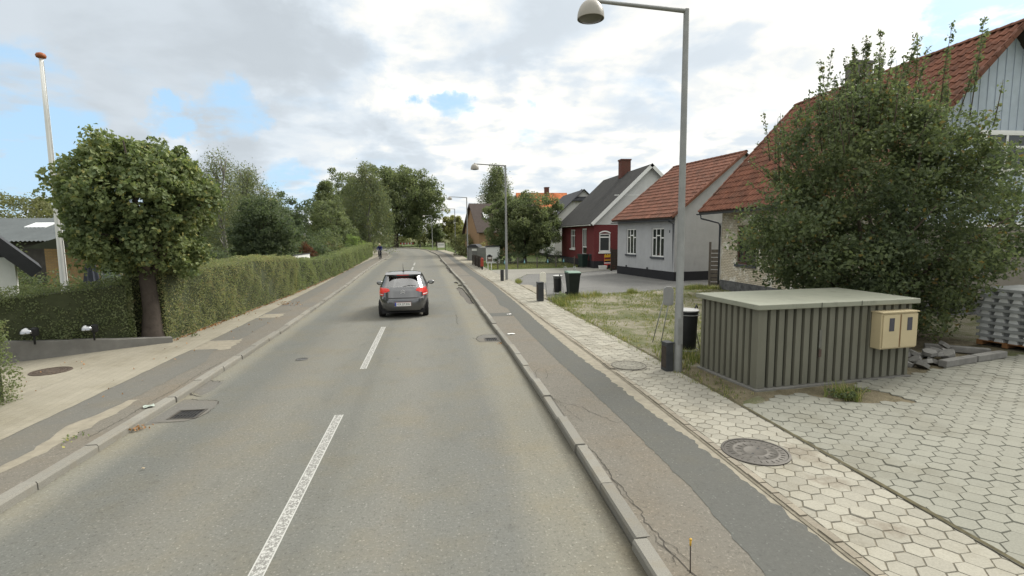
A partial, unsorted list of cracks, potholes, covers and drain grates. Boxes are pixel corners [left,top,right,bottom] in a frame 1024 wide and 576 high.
manhole cover [721,438,792,466]
manhole cover [611,361,647,370]
manhole cover [28,366,73,376]
crack [588,447,696,576]
